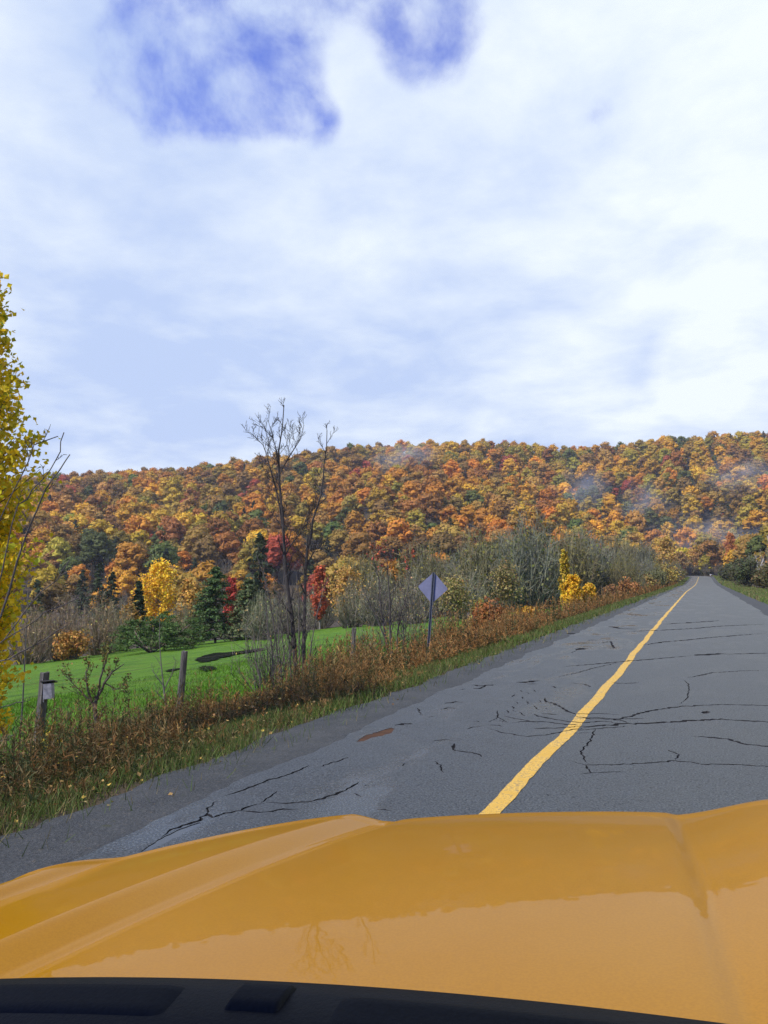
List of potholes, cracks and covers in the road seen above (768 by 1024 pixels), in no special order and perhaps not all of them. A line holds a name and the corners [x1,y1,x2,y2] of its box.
crack [161,757,405,838]
crack [435,621,768,774]
crack [398,685,488,725]
